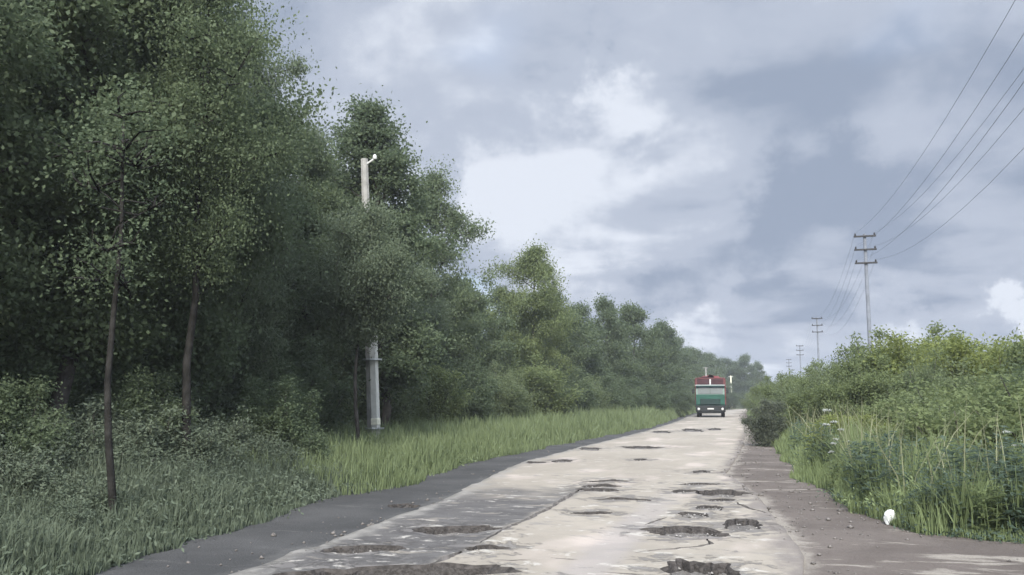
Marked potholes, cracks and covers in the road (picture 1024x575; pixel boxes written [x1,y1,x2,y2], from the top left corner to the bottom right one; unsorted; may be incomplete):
pothole [412,525,502,536]
pothole [640,526,731,541]
pothole [722,519,763,531]
pothole [321,545,407,554]
pothole [660,558,741,575]
pothole [695,489,752,497]
crack [640,517,714,552]
